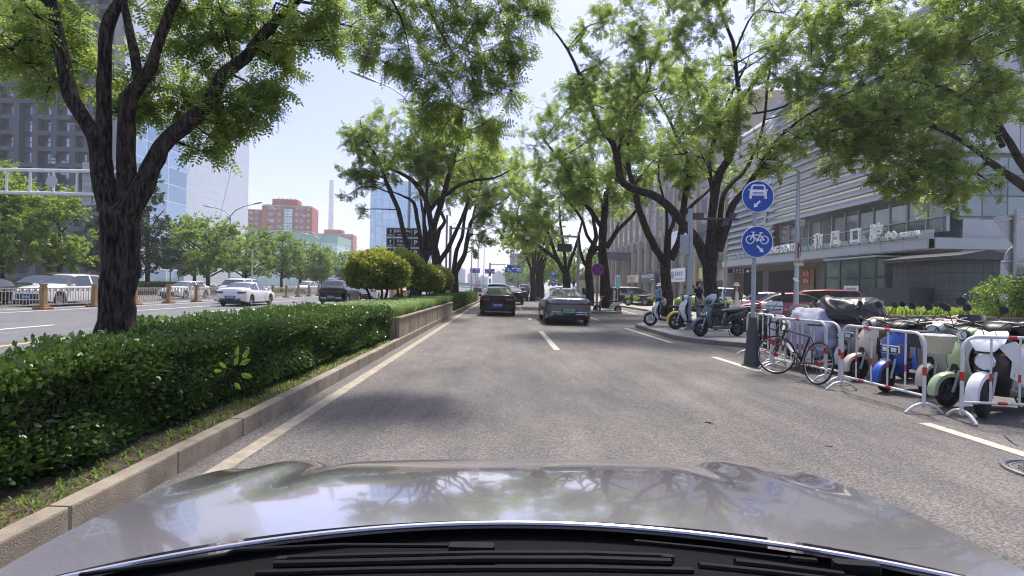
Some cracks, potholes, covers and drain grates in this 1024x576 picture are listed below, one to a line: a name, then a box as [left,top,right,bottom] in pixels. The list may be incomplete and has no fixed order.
manhole cover [999,458,1024,477]
